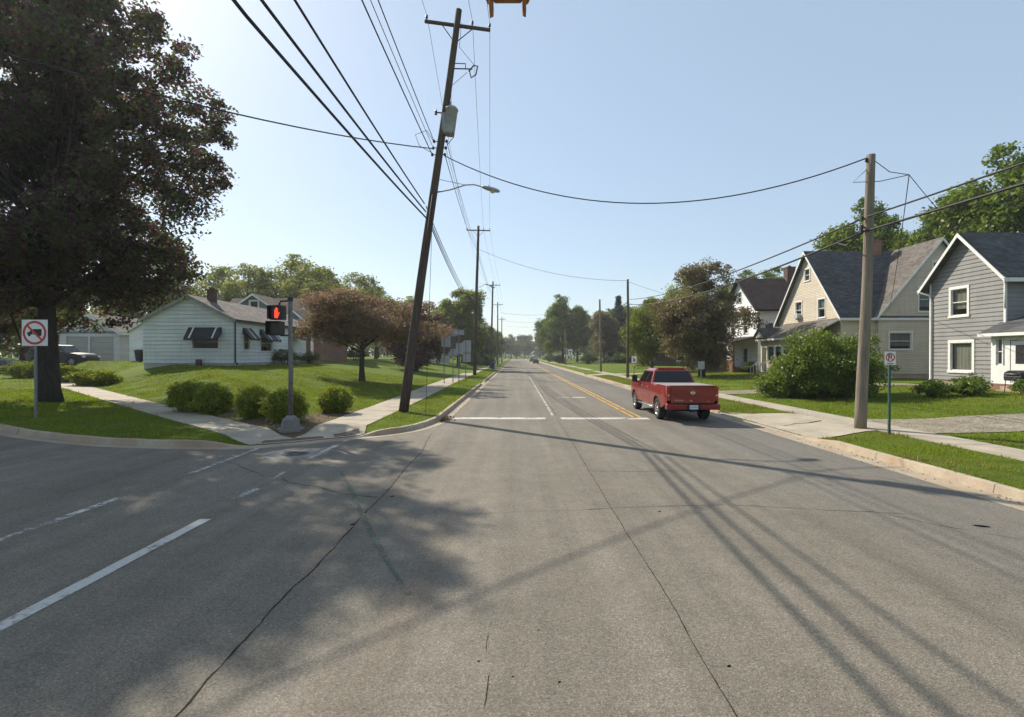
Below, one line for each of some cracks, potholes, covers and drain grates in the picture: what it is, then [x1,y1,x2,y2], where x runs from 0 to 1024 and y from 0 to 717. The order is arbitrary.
crack [174,435,431,717]
